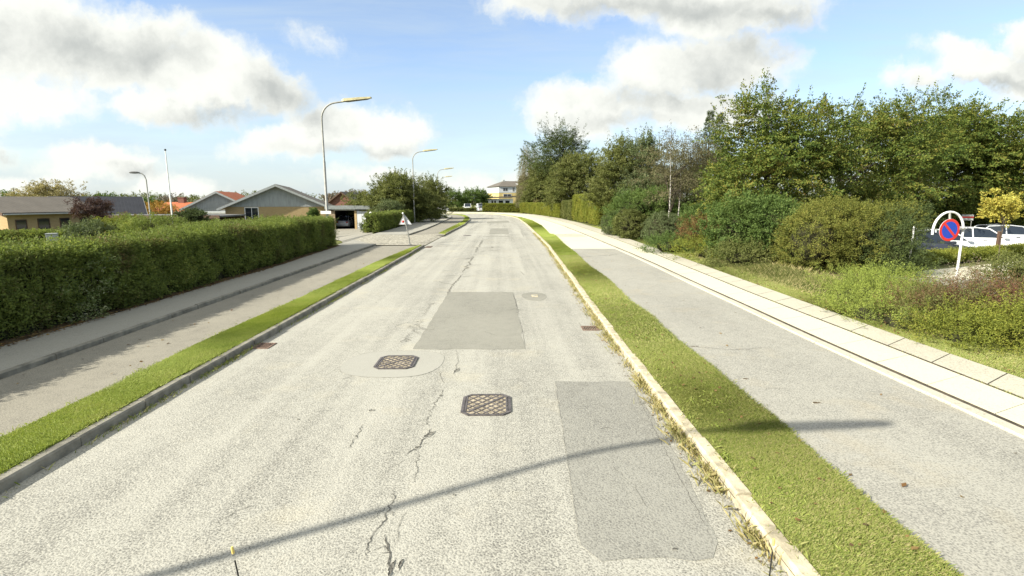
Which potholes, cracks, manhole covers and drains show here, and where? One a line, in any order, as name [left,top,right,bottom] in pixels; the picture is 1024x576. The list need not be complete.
crack [365,355,459,572]
crack [379,240,497,341]
